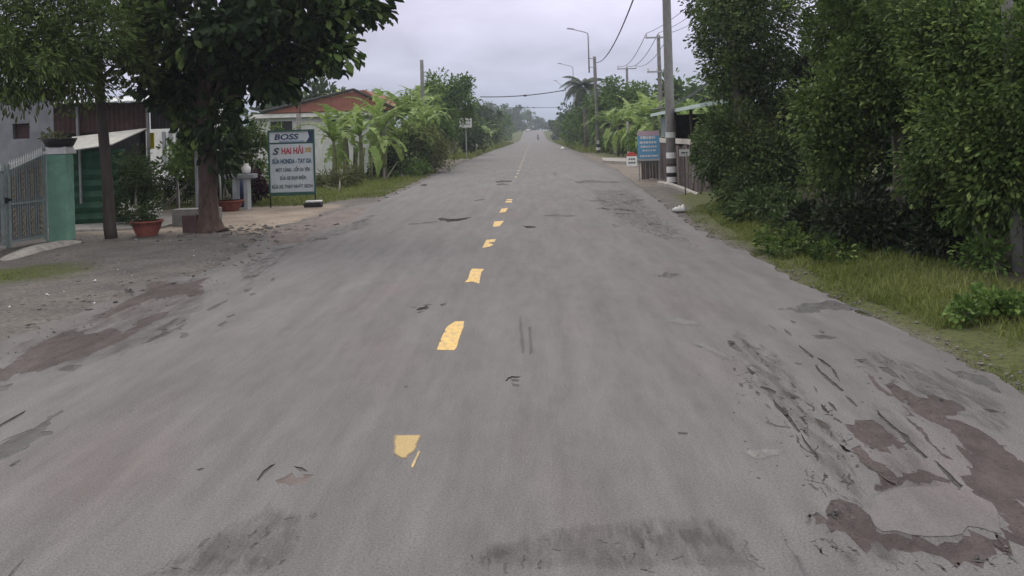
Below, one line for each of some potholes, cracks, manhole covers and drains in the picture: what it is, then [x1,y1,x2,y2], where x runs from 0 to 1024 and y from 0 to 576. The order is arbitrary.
crack [727,324,963,556]
pothole [275,473,314,486]
